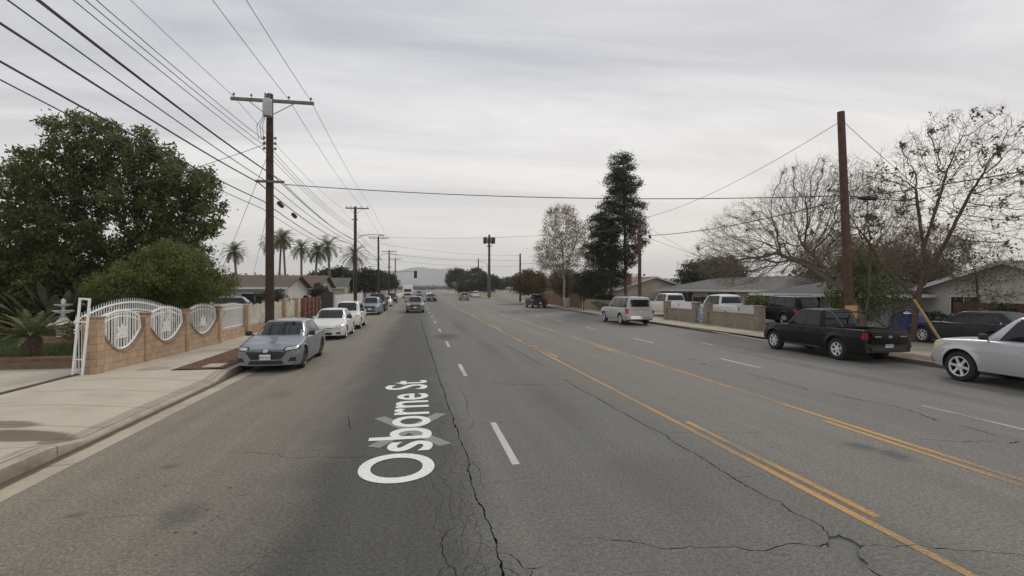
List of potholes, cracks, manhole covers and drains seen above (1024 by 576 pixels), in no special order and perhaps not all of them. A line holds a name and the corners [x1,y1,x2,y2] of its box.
pothole [827,534,868,567]
crack [564,379,829,556]
crack [421,321,541,576]
crack [859,544,1024,558]
